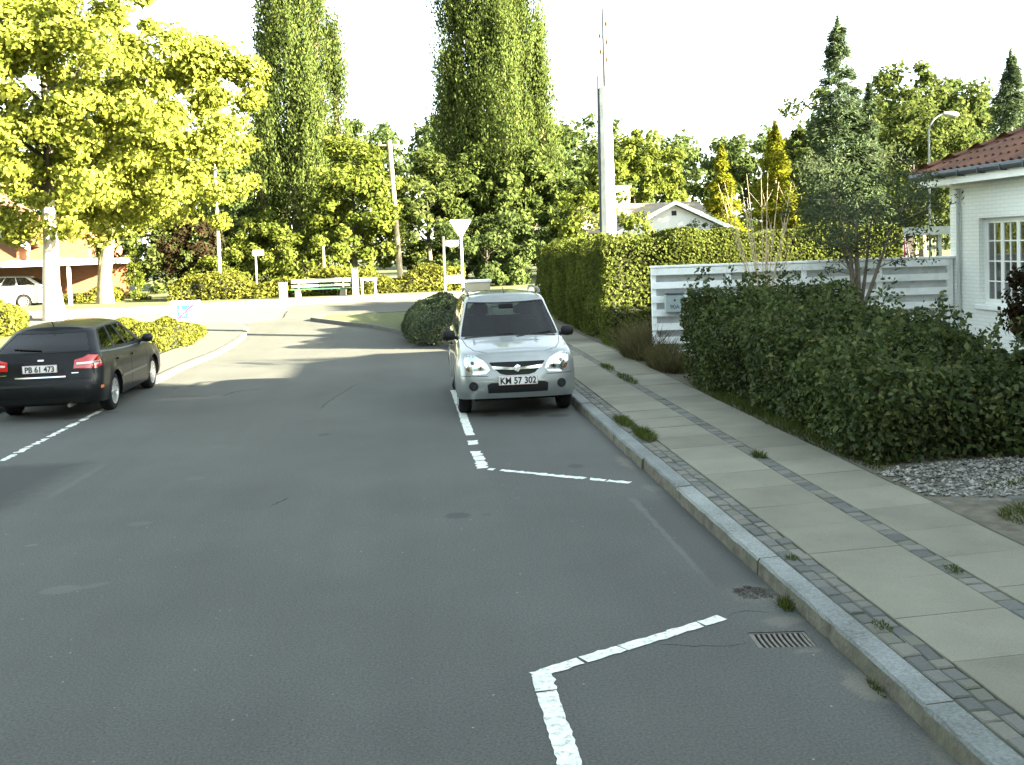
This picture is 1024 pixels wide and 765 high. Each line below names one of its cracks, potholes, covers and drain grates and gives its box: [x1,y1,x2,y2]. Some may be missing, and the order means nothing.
pothole [731,585,777,599]
drain grate [748,632,816,648]
